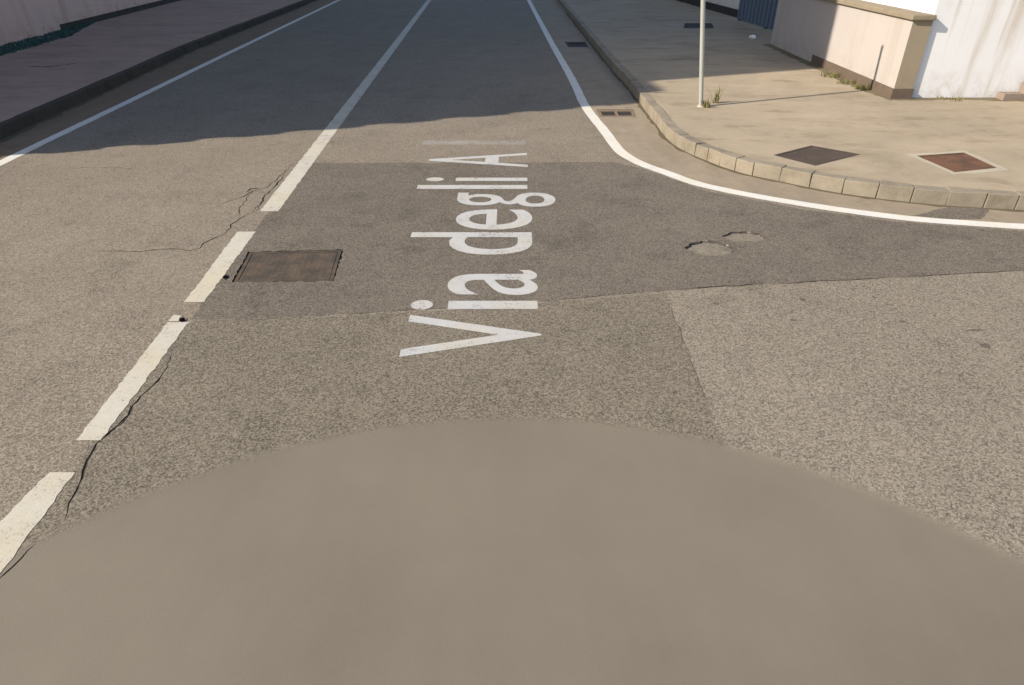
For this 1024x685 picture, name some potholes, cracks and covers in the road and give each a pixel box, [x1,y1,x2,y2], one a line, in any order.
pothole [685,240,734,256]
pothole [722,231,766,242]
drain grate [597,109,636,117]
manhole cover [775,145,861,166]
manhole cover [232,249,343,282]
manhole cover [918,152,996,172]
crack [86,166,290,252]
crack [0,353,172,578]
